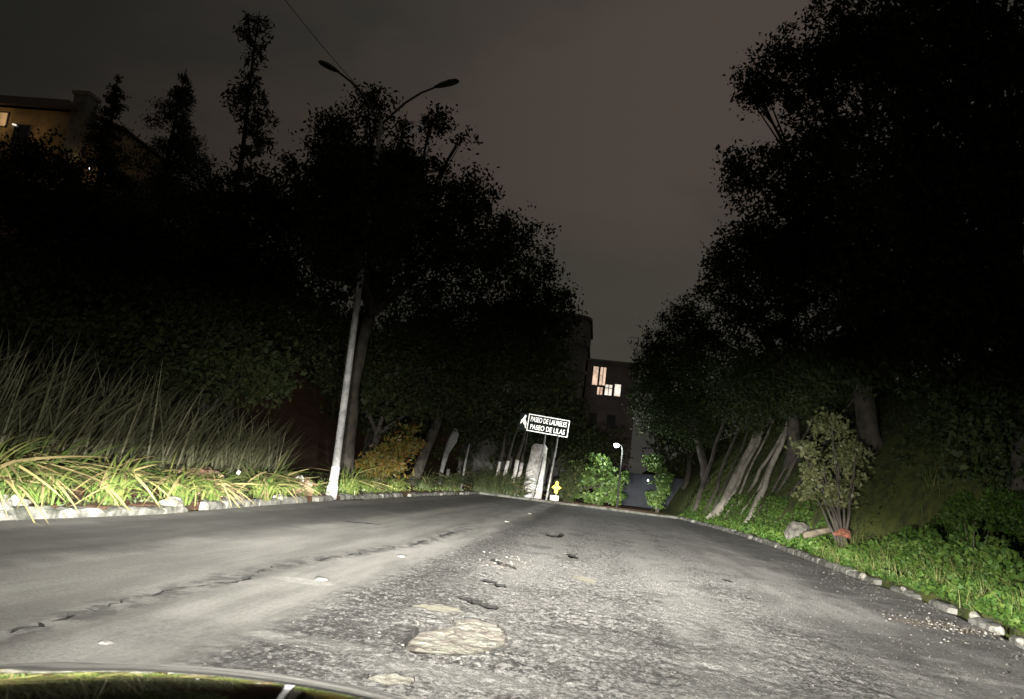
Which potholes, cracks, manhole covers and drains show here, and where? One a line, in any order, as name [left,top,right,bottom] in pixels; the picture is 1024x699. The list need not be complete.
crack [10,531,460,633]
